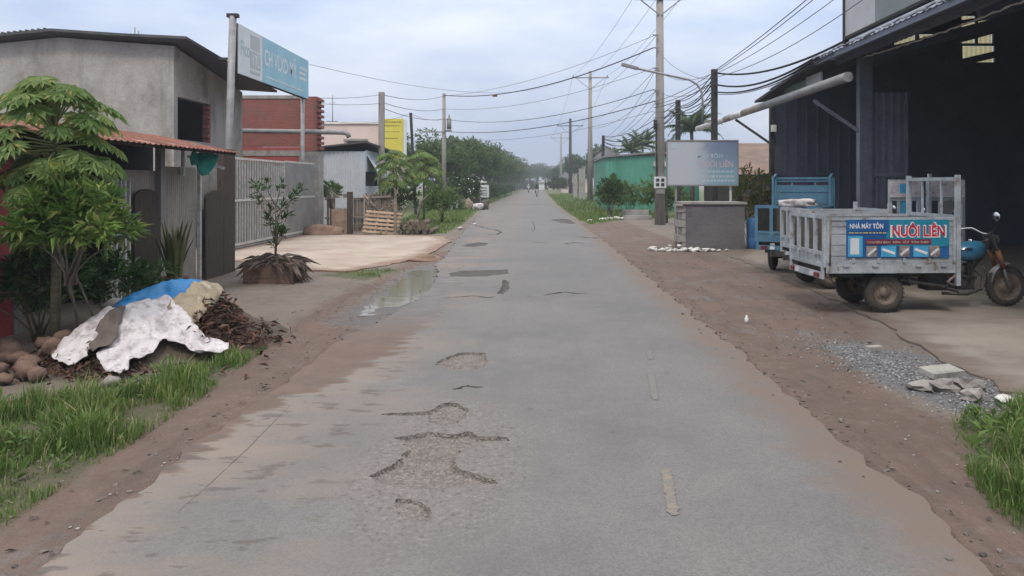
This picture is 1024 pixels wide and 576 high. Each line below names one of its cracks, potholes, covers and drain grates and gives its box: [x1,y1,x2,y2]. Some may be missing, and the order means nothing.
pothole [393,498,432,522]
crack [177,408,288,513]
pothole [435,352,488,370]
pothole [369,431,510,490]
pothole [381,402,469,426]
